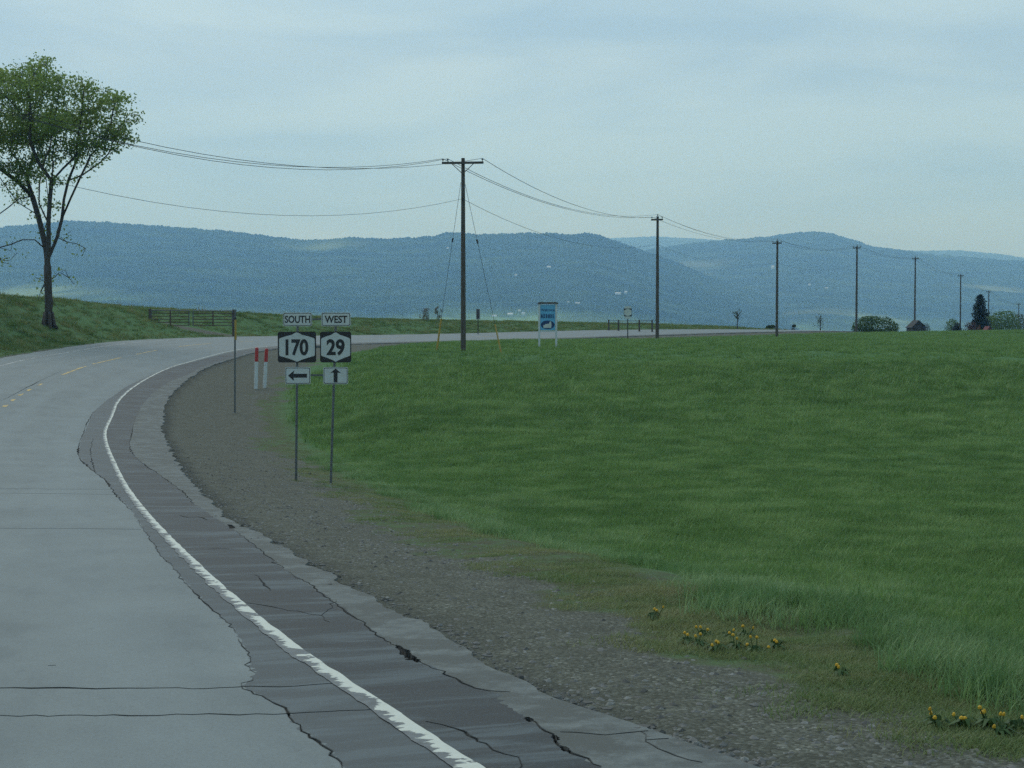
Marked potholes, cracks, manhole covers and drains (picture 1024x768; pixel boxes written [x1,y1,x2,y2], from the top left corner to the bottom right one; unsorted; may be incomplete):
crack [0,520,371,766]
crack [529,719,700,767]
crack [420,662,509,692]
crack [77,412,132,510]
crack [129,428,206,520]
